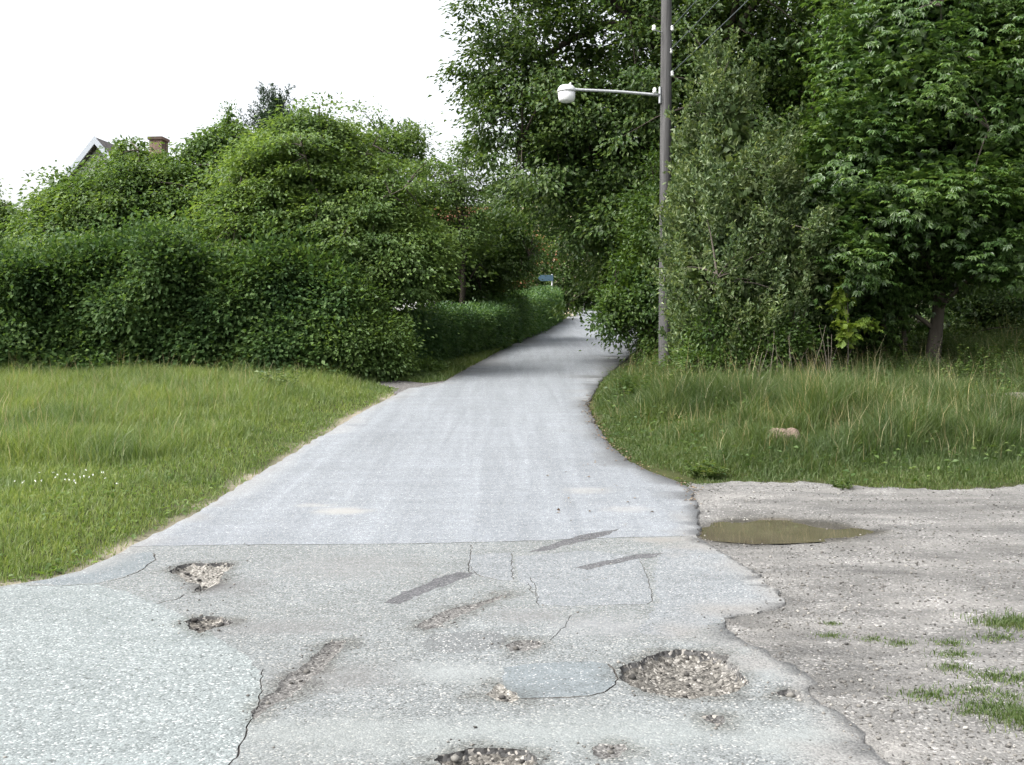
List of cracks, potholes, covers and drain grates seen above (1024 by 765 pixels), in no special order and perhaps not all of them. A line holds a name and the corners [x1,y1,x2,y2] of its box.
crack [468,545,653,641]
crack [25,553,156,586]
pothole [169,562,235,592]
pothole [434,748,537,765]
pothole [184,616,233,633]
pothole [505,640,543,651]
pothole [701,715,725,725]
pothole [619,649,750,699]
crack [228,670,264,765]
